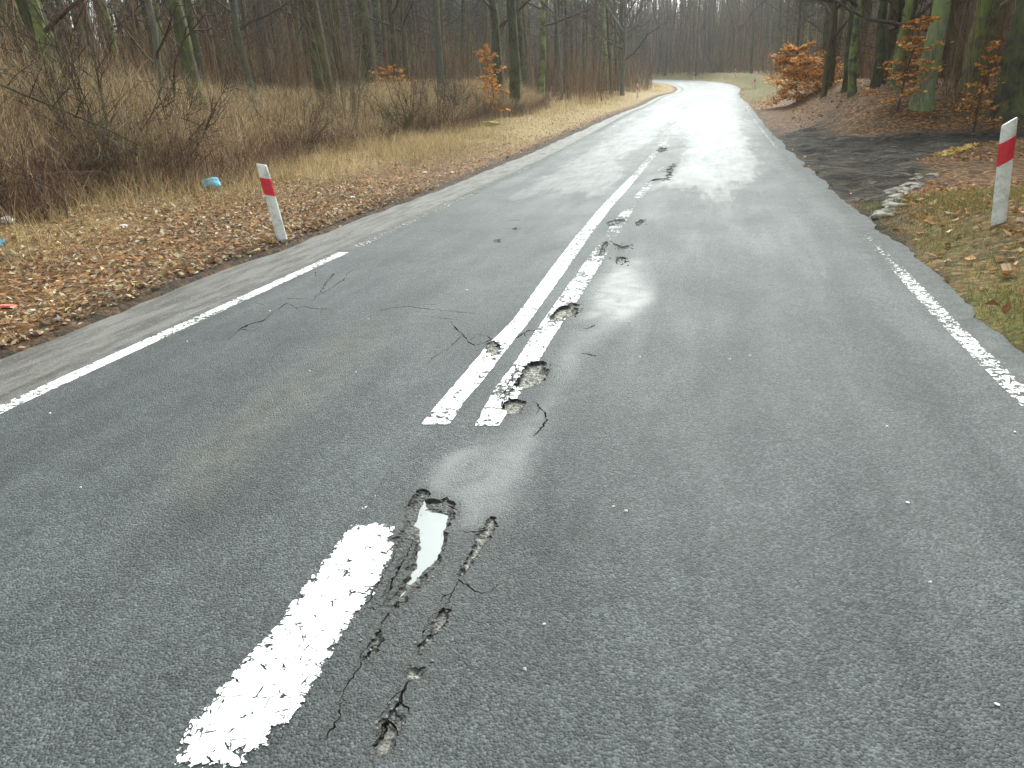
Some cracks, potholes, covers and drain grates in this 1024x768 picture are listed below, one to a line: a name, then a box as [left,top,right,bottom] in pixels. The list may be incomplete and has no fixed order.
pothole [650,163,677,181]
crack [534,403,548,436]
pothole [497,394,527,415]
pothole [548,302,583,322]
pothole [477,340,502,356]
crack [323,544,412,742]
pothole [456,516,499,578]
pothole [364,687,417,757]
pothole [382,489,461,612]
crack [227,268,356,340]
pothole [413,607,455,654]
pothole [511,361,556,390]
